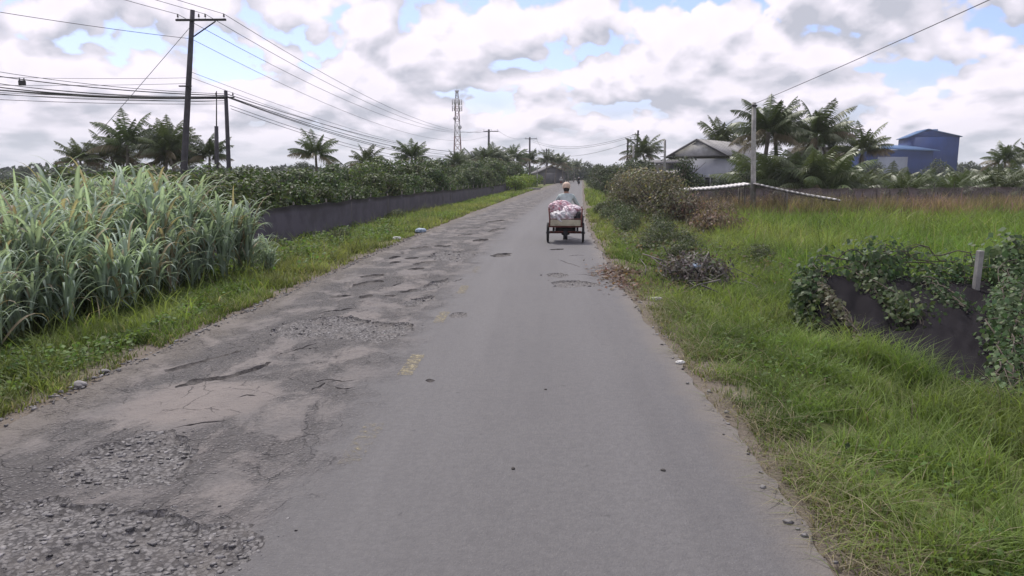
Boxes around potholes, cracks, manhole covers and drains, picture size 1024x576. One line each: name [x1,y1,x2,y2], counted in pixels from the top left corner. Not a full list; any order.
crack [311,379,353,391]
pothole [0,491,297,576]
pothole [551,280,600,288]
pothole [0,419,217,501]
pothole [251,313,423,344]
